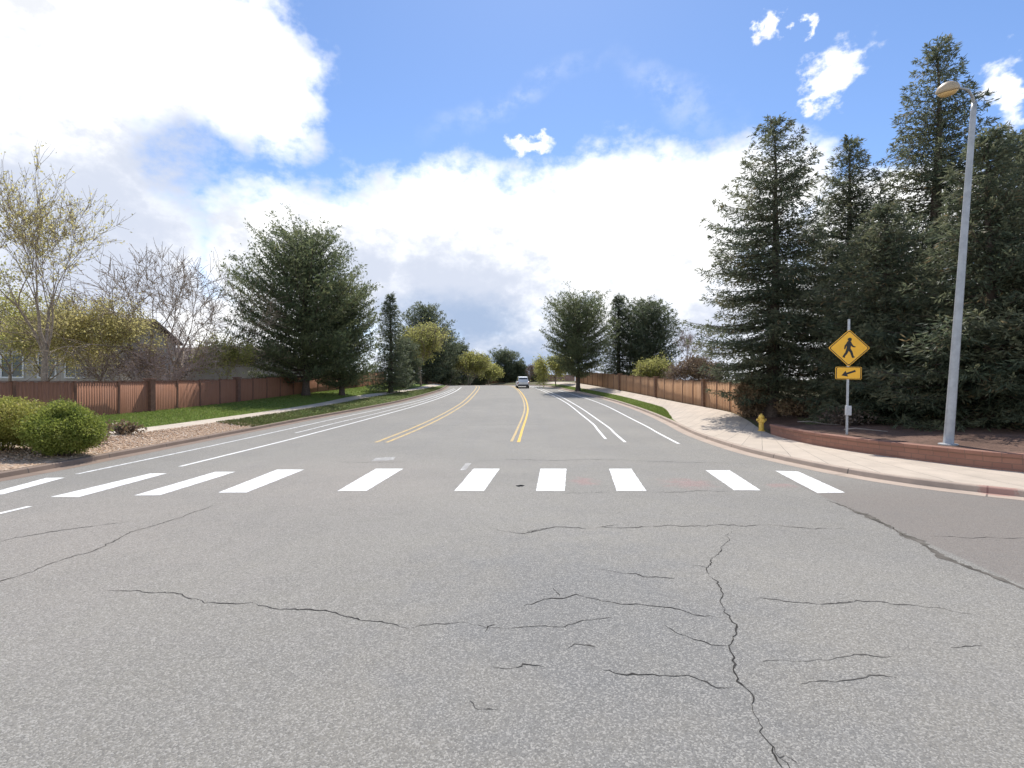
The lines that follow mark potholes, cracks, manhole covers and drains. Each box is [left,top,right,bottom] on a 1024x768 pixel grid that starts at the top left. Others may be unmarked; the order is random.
crack [609,532,796,768]
crack [526,588,710,616]
crack [107,590,611,632]
crack [801,674,893,684]
crack [488,524,864,534]
crack [758,597,969,614]
